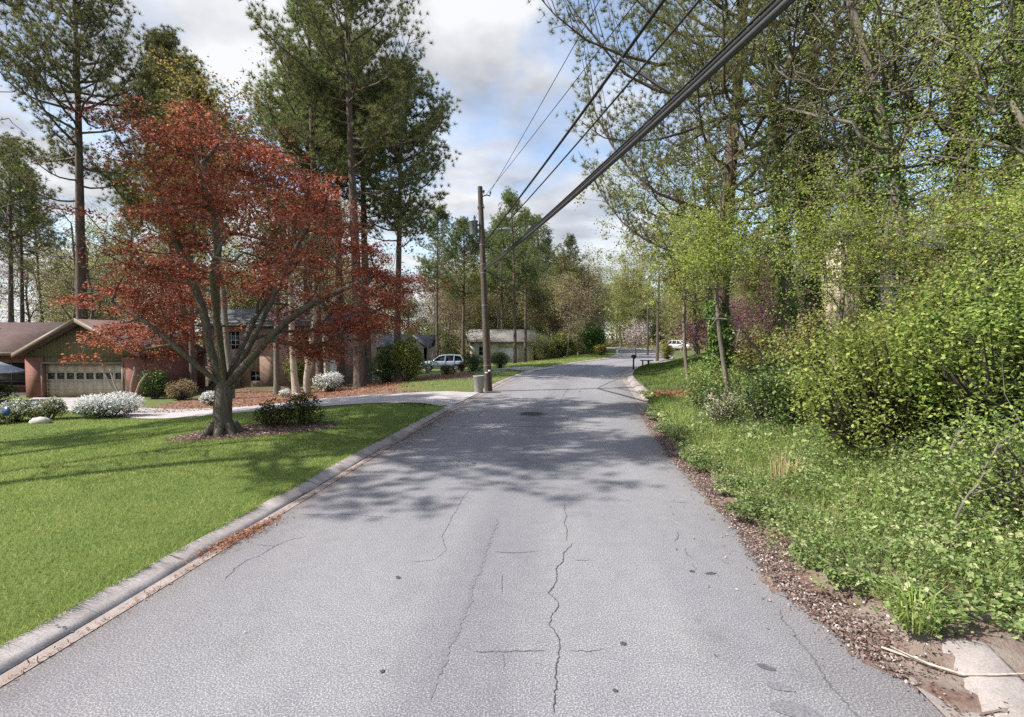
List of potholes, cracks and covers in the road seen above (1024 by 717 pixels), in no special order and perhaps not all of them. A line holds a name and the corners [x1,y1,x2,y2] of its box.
crack [477,506,601,715]
crack [779,611,859,717]
